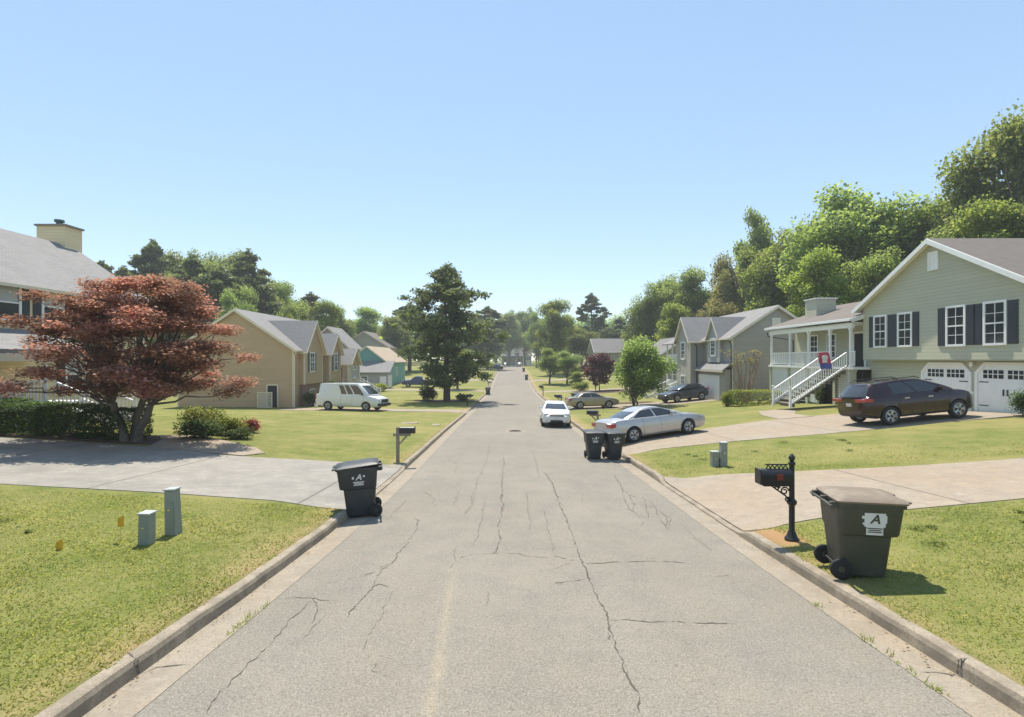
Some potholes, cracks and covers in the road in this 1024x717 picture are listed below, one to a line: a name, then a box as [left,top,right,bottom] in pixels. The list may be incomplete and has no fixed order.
crack [207,451,726,710]
